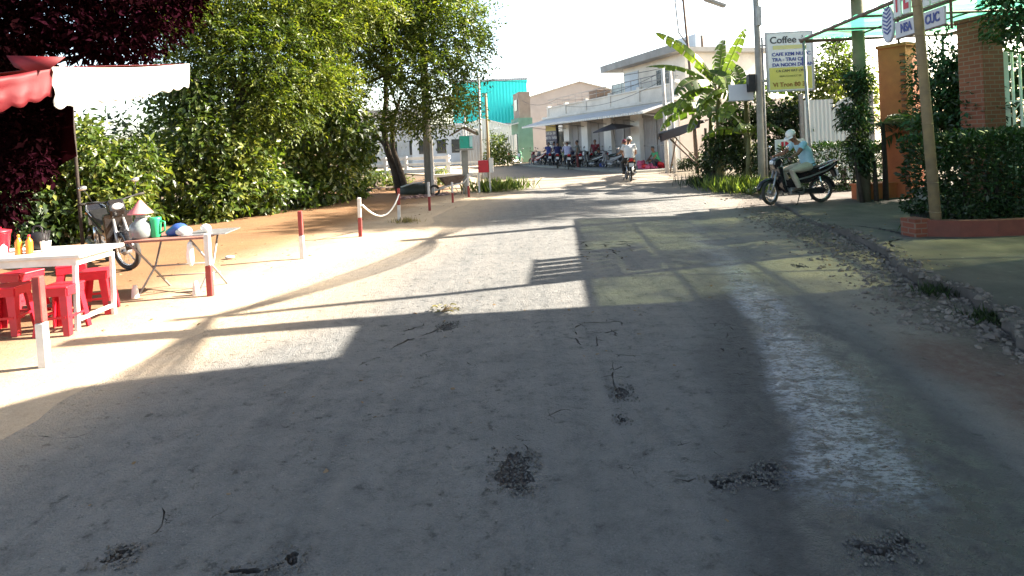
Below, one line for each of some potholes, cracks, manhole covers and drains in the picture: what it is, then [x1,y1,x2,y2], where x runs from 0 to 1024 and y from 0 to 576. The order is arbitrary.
pothole [732,457,796,491]
pothole [841,529,931,566]
crack [572,320,640,438]
pothole [79,542,152,572]
pothole [484,444,545,498]
crack [360,320,460,366]
